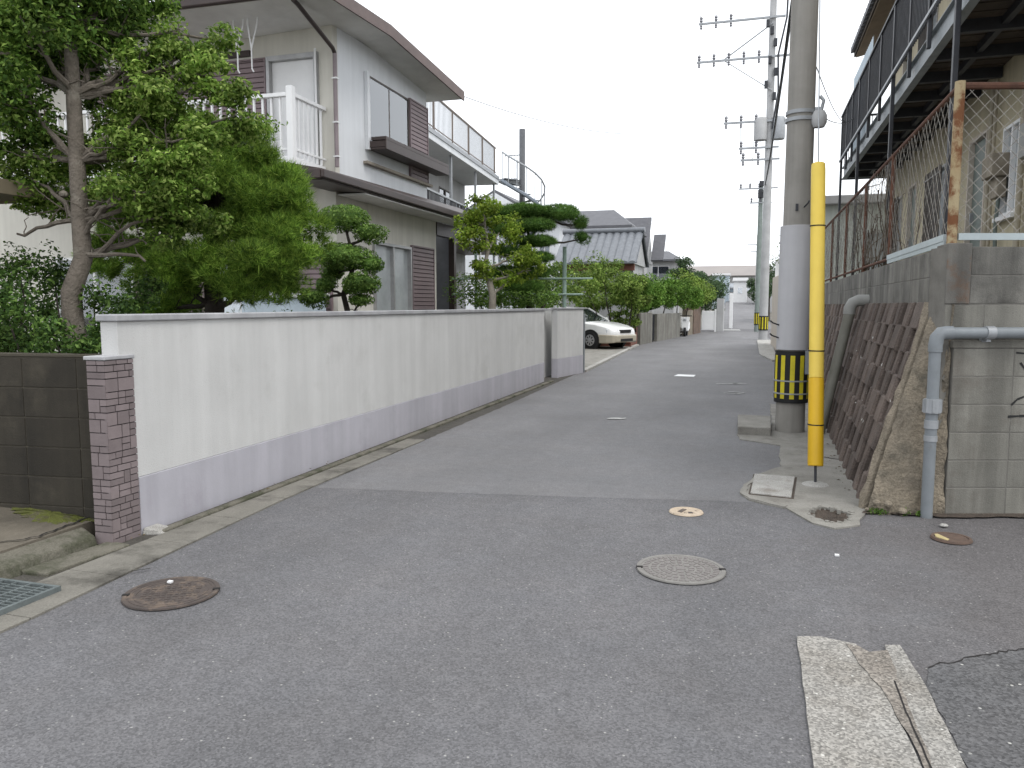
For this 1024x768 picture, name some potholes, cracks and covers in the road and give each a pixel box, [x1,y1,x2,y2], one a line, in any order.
manhole cover [121,576,220,611]
utility cover [669,507,704,517]
utility cover [930,532,973,545]
drain grate [0,578,61,616]
manhole cover [636,554,726,585]
crack [928,648,1024,668]
